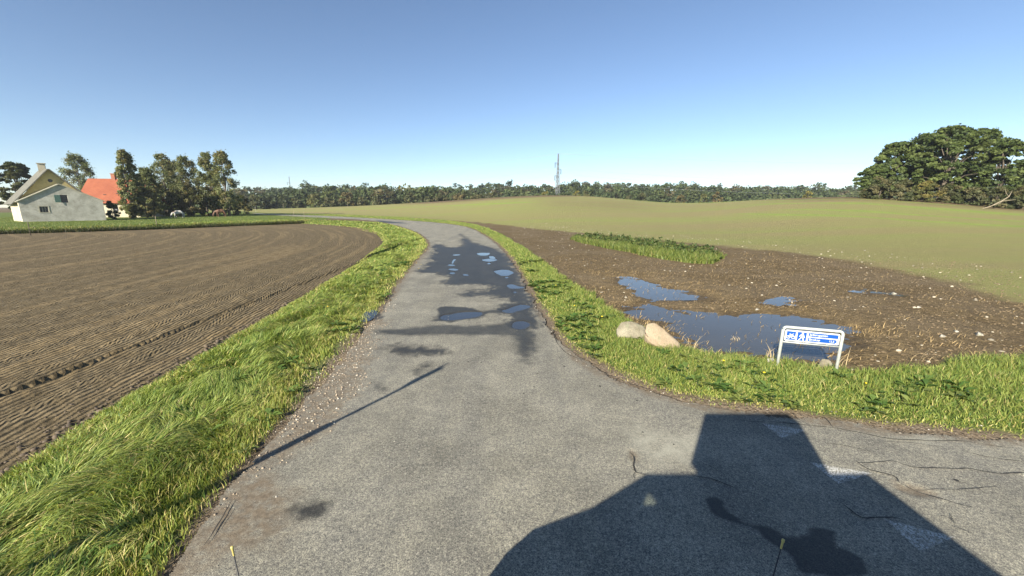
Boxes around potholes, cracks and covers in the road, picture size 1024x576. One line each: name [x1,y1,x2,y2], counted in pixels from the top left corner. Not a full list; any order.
crack [704,404,1024,532]
